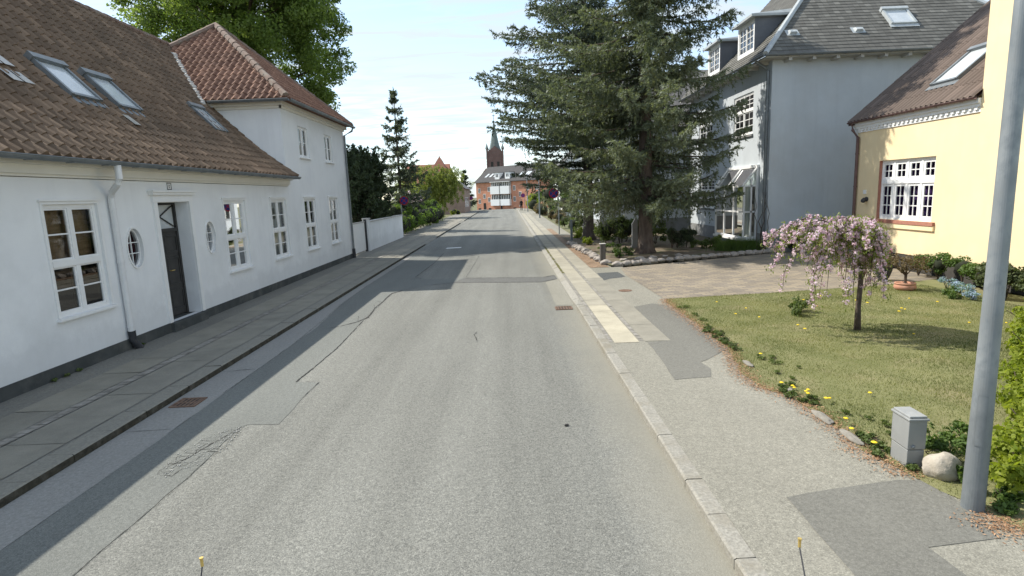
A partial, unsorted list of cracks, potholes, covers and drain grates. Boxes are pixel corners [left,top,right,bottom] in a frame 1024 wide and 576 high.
crack [155,426,248,478]
crack [332,291,399,328]
drain grate [168,397,208,408]
